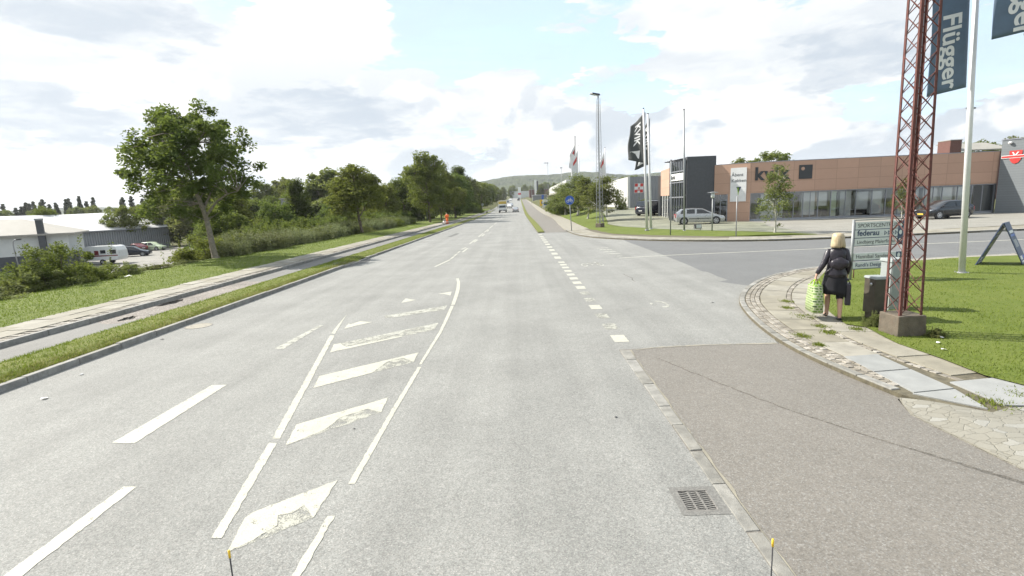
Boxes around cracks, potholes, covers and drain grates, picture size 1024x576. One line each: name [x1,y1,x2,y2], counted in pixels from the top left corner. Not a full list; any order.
drain grate [675,489,720,512]
